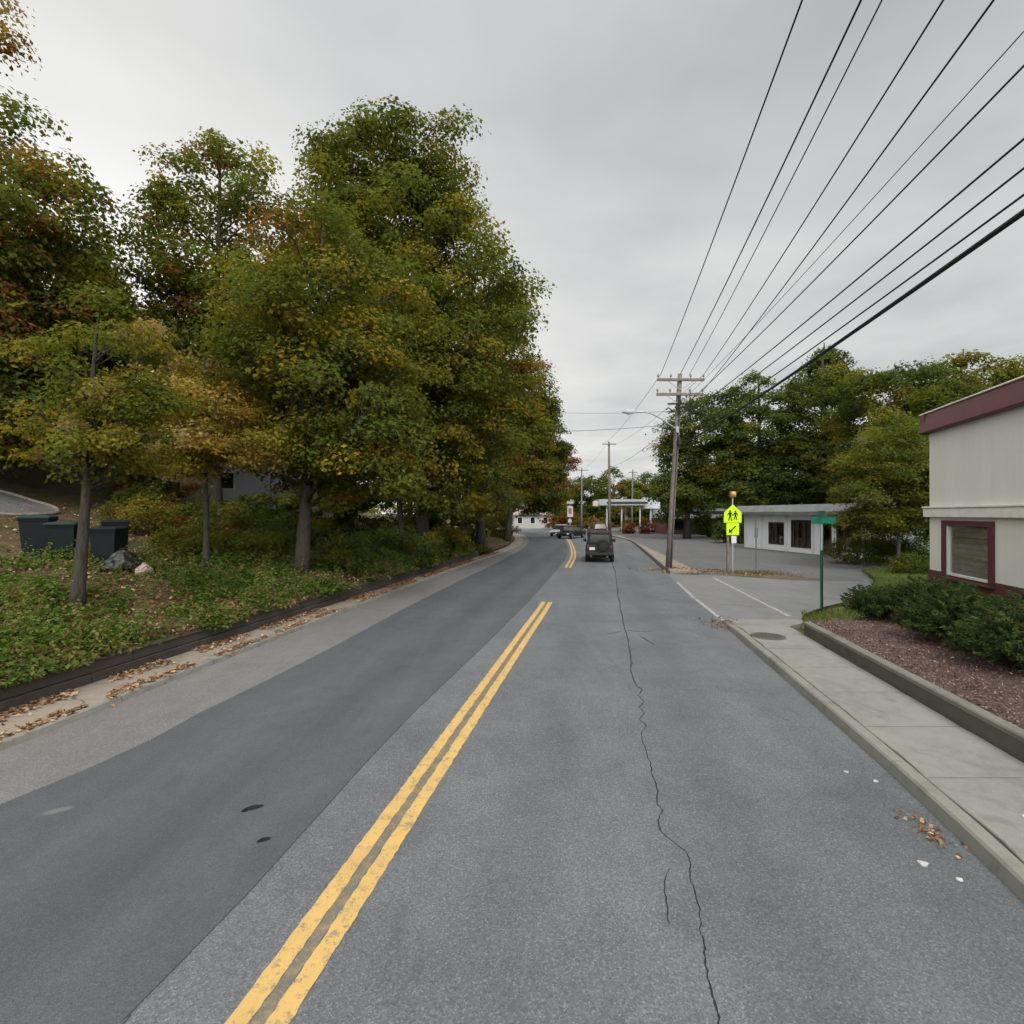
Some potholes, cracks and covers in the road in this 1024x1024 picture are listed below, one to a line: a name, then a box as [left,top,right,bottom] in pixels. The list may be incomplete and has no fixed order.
crack [610,563,720,1024]
manhole cover [750,632,786,640]
